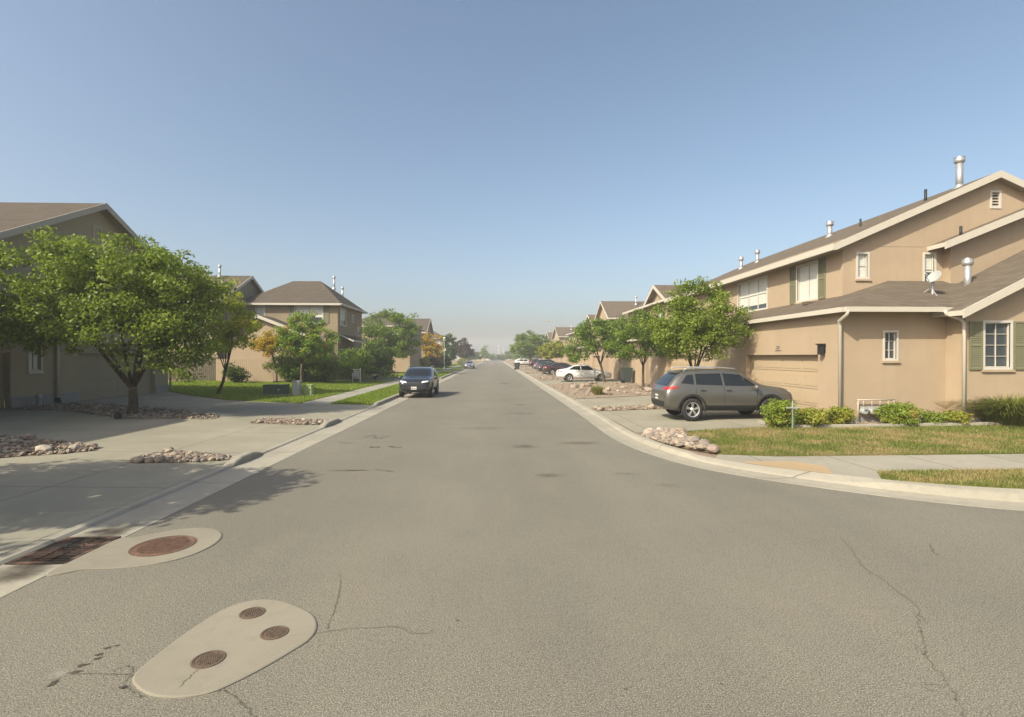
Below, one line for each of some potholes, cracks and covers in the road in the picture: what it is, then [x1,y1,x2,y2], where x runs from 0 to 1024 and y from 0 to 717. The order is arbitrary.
manhole cover [239,607,265,619]
manhole cover [260,625,289,640]
manhole cover [128,535,197,557]
crack [315,575,431,634]
crack [840,537,965,717]
manhole cover [190,650,226,669]
drain grate [4,536,121,565]
